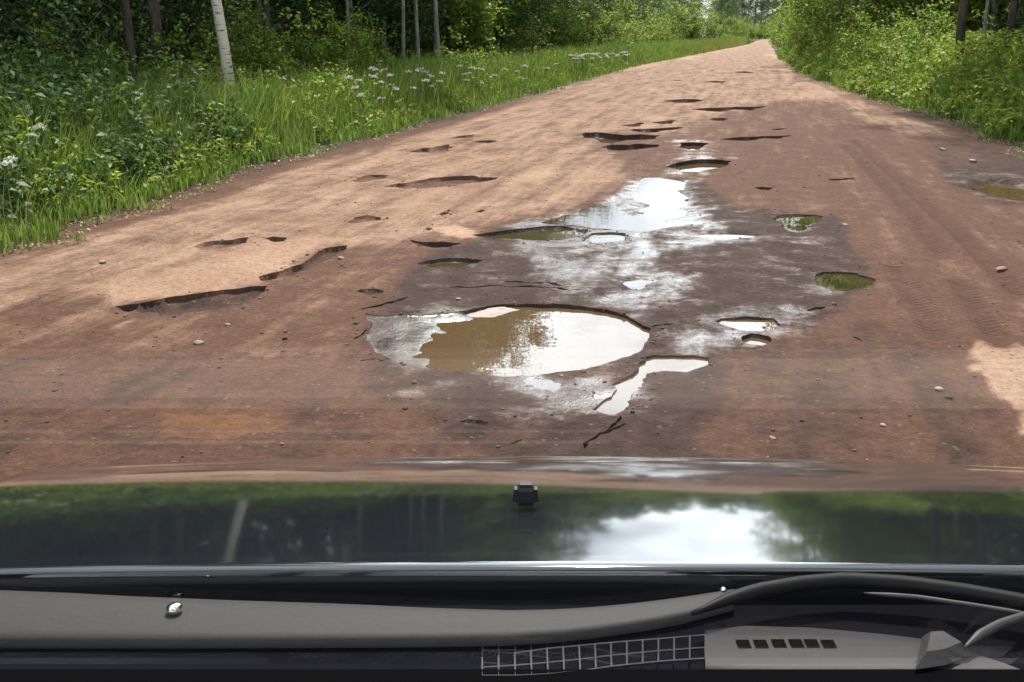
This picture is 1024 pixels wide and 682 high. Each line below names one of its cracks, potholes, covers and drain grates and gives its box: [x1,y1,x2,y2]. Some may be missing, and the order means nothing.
pothole [593,355,709,416]
pothole [115,286,267,314]
pothole [365,304,651,368]
pothole [384,175,499,189]
pothole [716,316,781,331]
pothole [741,333,772,342]
pothole [815,271,876,291]
pothole [411,240,461,248]
pothole [773,214,824,233]
pothole [667,159,732,168]
pothole [582,132,661,141]
pothole [474,226,588,241]
